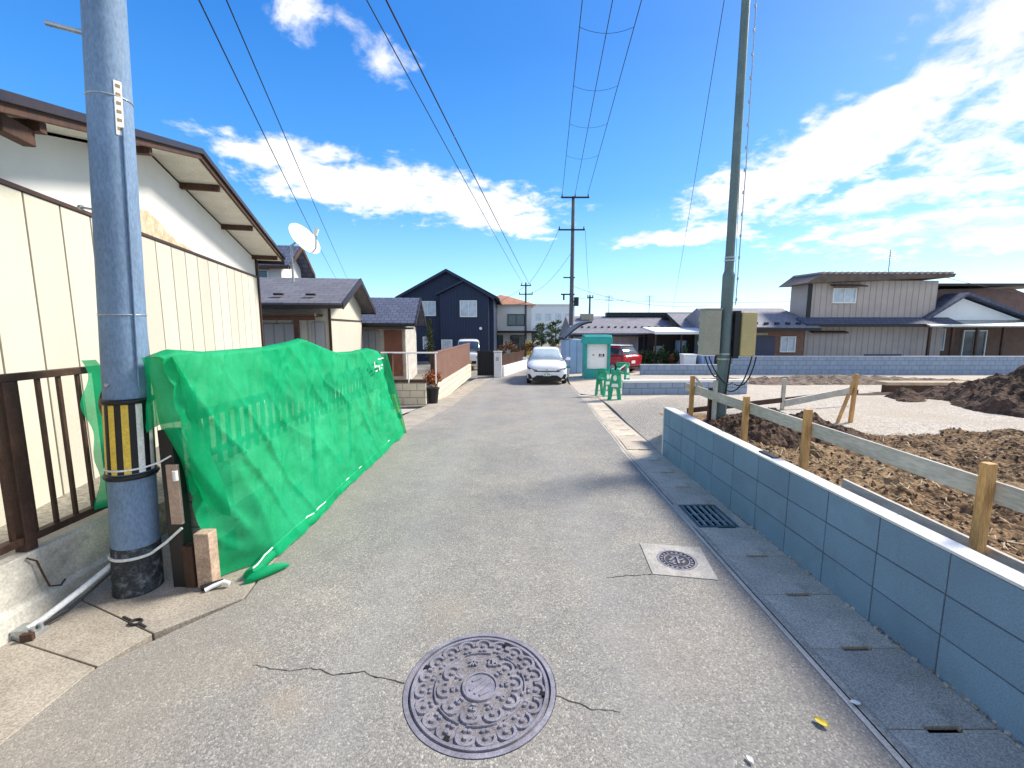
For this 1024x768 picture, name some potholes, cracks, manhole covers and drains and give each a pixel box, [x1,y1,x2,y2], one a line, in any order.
utility cover [640,543,718,580]
crack [556,695,621,713]
drain grate [674,505,749,533]
manhole cover [402,633,556,760]
crack [256,664,405,684]
